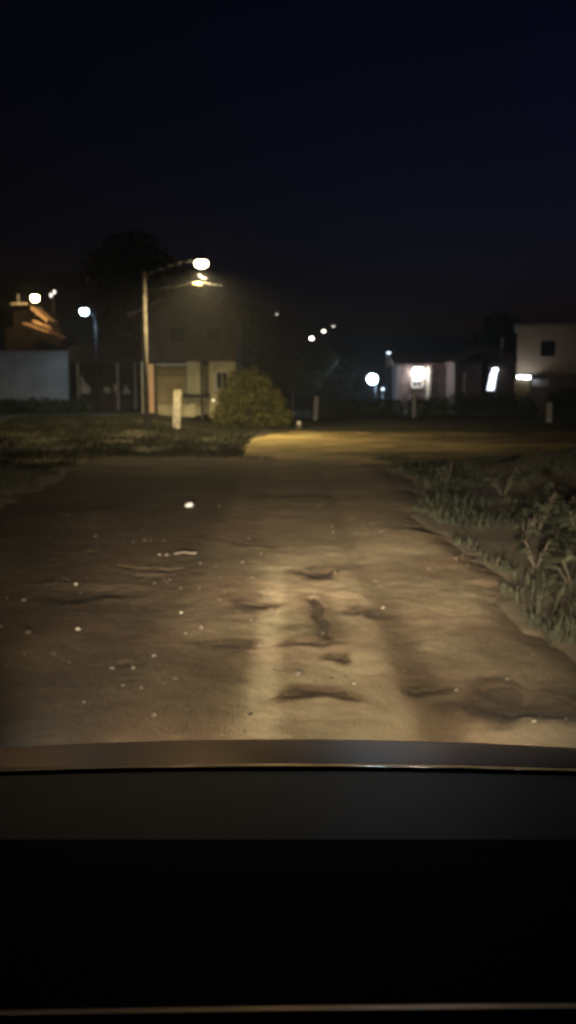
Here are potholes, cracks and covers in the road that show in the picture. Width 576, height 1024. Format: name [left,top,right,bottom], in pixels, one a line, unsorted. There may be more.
pothole [236,601,280,610]
pothole [345,607,384,618]
pothole [467,688,576,722]
pothole [34,585,142,605]
pothole [201,640,253,650]
pothole [297,569,336,580]
pothole [276,685,356,701]
pothole [326,654,350,663]
pothole [404,687,449,697]
